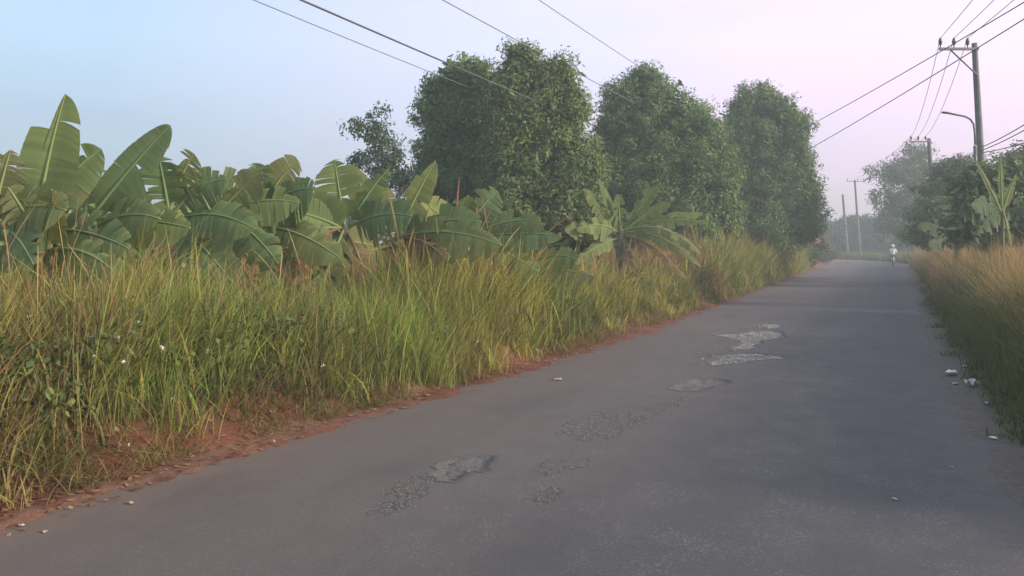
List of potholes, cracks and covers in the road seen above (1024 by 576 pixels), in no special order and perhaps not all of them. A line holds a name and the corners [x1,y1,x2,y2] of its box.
pothole [679,351,810,366]
pothole [426,450,500,483]
pothole [713,329,790,351]
